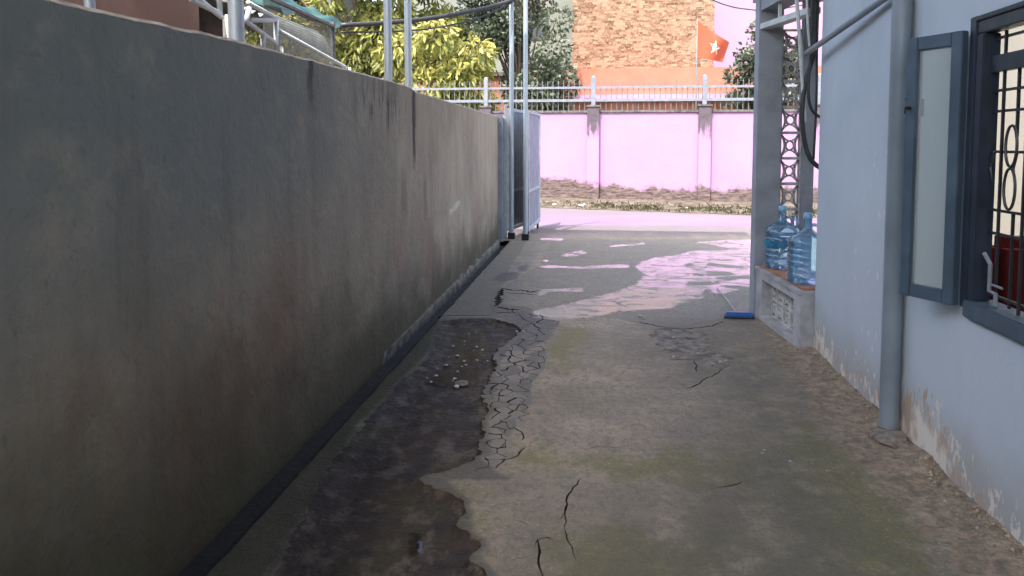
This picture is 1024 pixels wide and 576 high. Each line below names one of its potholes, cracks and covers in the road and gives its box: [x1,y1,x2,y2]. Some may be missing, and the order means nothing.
crack [612,311,723,332]
crack [514,479,580,576]
crack [671,359,723,389]
crack [478,289,558,469]
pothole [274,318,522,576]
